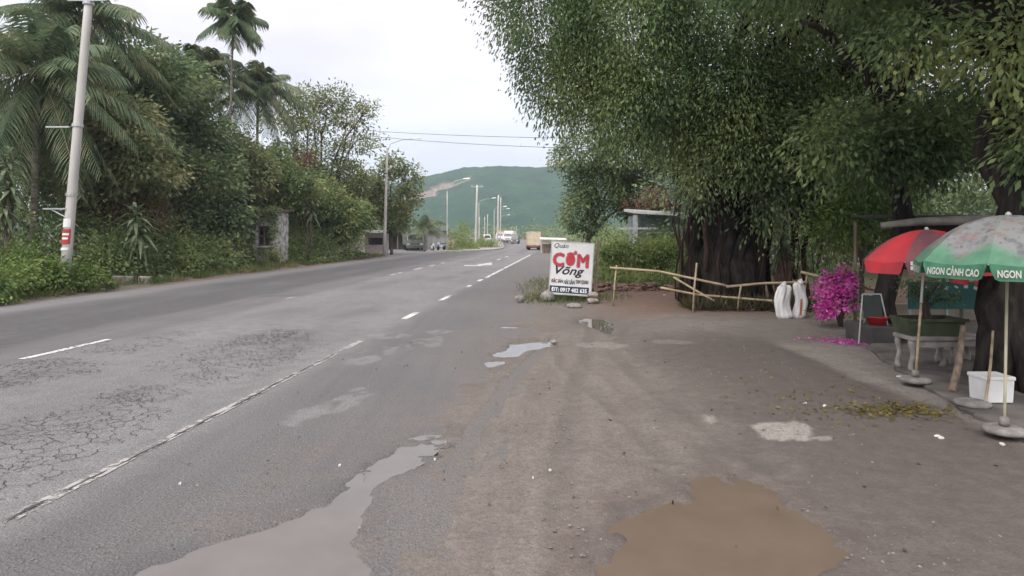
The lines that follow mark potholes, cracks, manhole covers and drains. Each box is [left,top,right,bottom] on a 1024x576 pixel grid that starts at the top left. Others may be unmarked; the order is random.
crack [0,329,335,521]
pothole [476,338,565,362]
